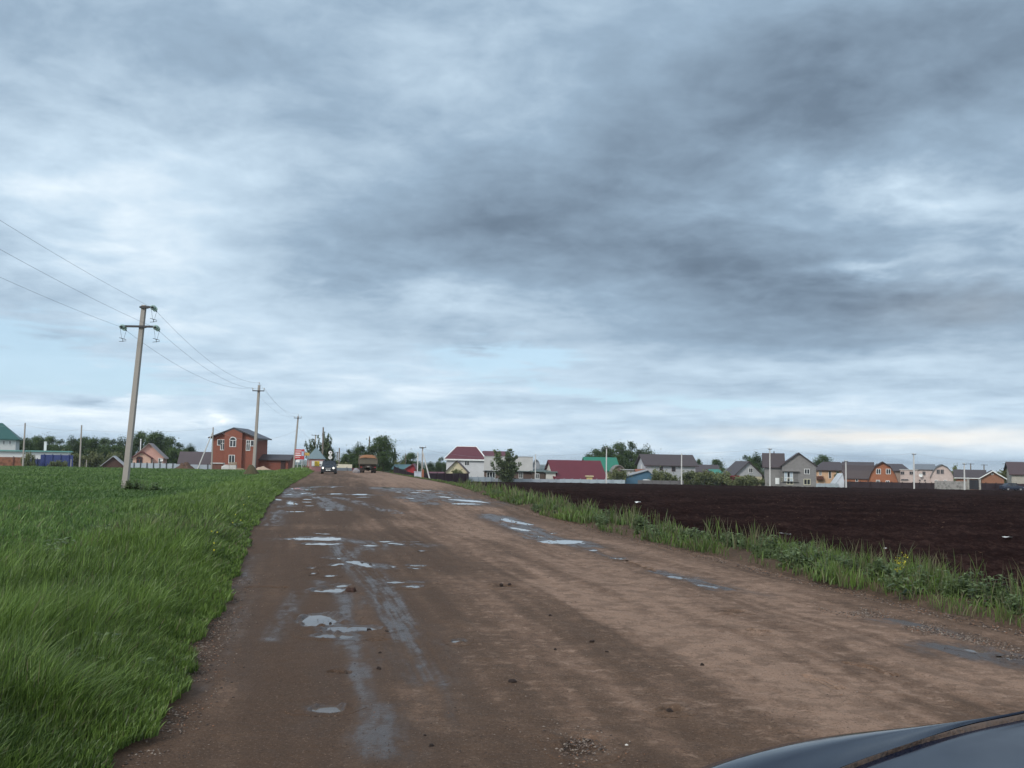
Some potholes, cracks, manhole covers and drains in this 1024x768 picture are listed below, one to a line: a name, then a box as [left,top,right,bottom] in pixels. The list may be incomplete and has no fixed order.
pothole [275,609,405,642]
pothole [527,538,602,546]
pothole [495,524,555,537]
pothole [493,516,551,528]
pothole [284,702,367,717]
pothole [427,497,513,505]
pothole [282,582,379,595]
